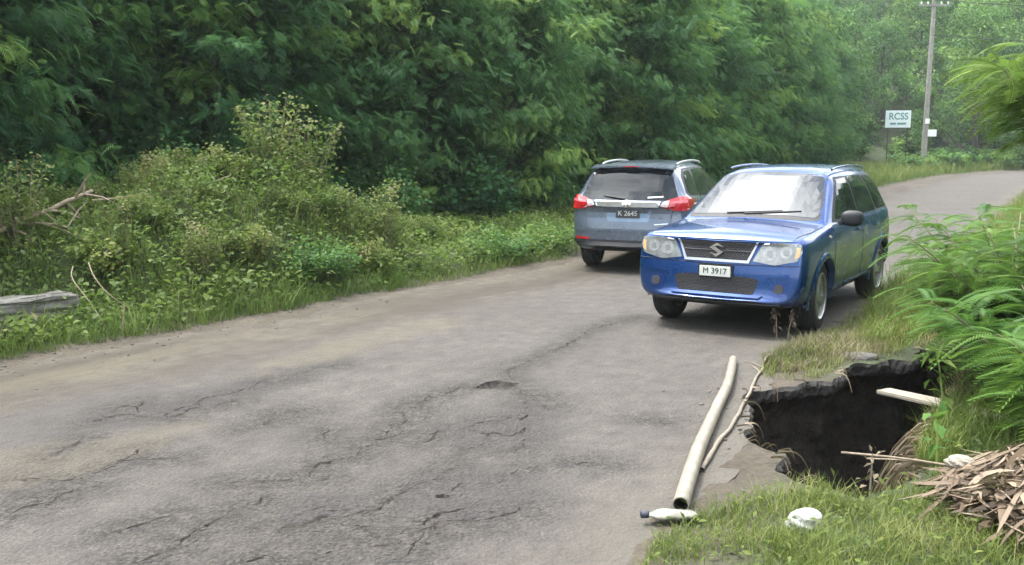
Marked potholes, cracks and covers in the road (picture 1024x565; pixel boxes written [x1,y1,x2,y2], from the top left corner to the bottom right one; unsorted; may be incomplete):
crack [10,441,182,514]
crack [108,317,638,565]
pothole [742,348,972,498]
pothole [474,380,519,390]
